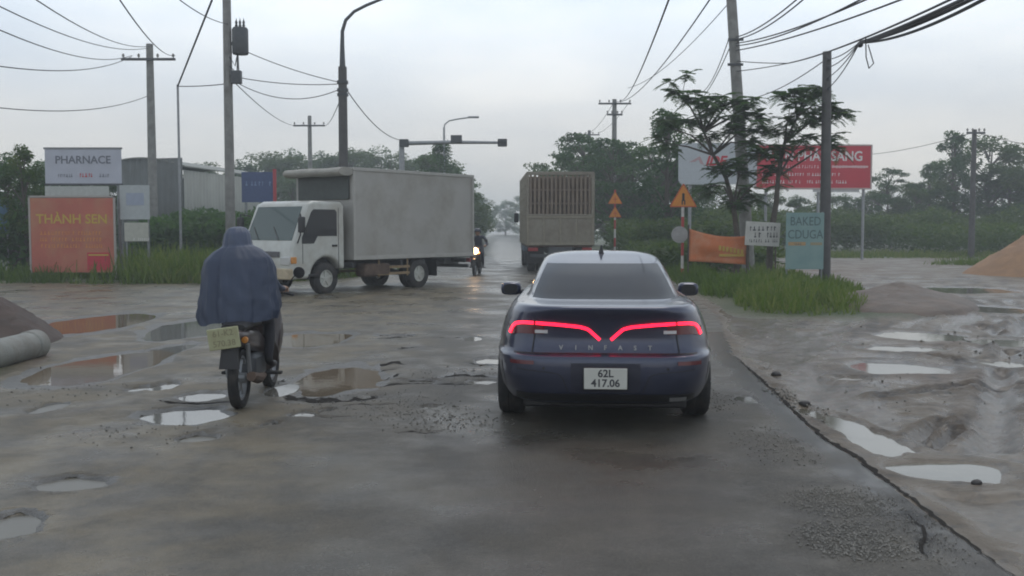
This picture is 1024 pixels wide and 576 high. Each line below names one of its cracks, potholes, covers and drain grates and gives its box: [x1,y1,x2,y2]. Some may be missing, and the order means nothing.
pothole [134,318,222,342]
pothole [0,349,176,390]
crack [731,352,1015,576]
pothole [0,507,49,540]
pothole [147,379,182,391]
pothole [174,390,228,402]
pothole [274,361,396,401]
pothole [15,474,120,492]
pothole [127,405,238,426]
pothole [44,312,167,337]
pothole [144,341,203,354]
